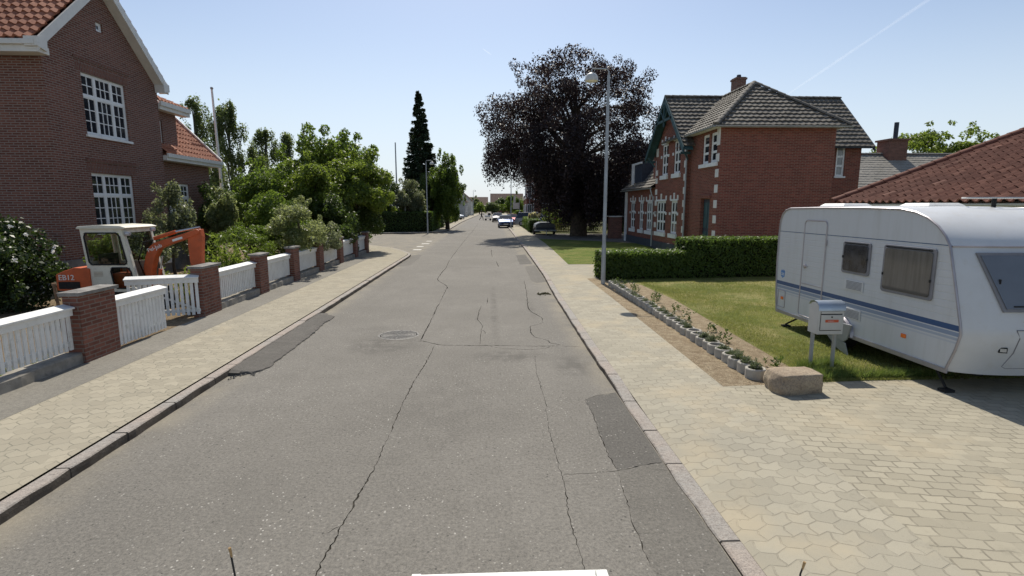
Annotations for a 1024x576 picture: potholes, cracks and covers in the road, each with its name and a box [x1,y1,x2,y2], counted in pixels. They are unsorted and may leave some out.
manhole cover [378,330,419,340]
crack [315,285,577,576]
